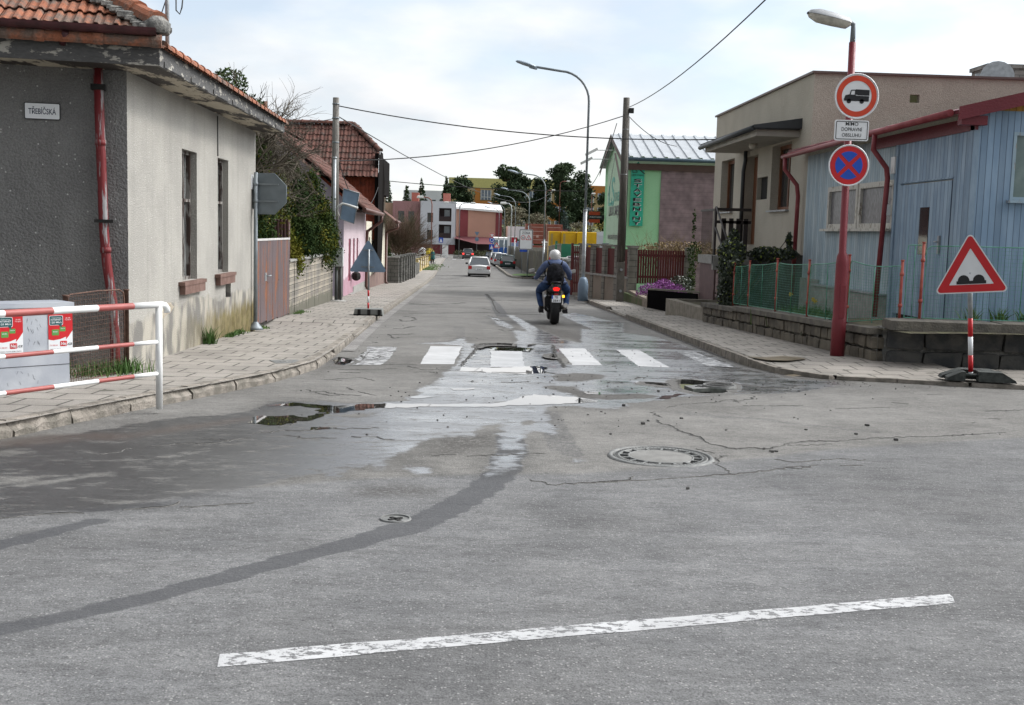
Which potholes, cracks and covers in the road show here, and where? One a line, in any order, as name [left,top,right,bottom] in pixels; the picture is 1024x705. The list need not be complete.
pothole [325,357,361,367]
pothole [666,379,742,395]
manhole cover [379,514,411,523]
crack [650,384,1020,474]
manhole cover [607,446,715,467]
